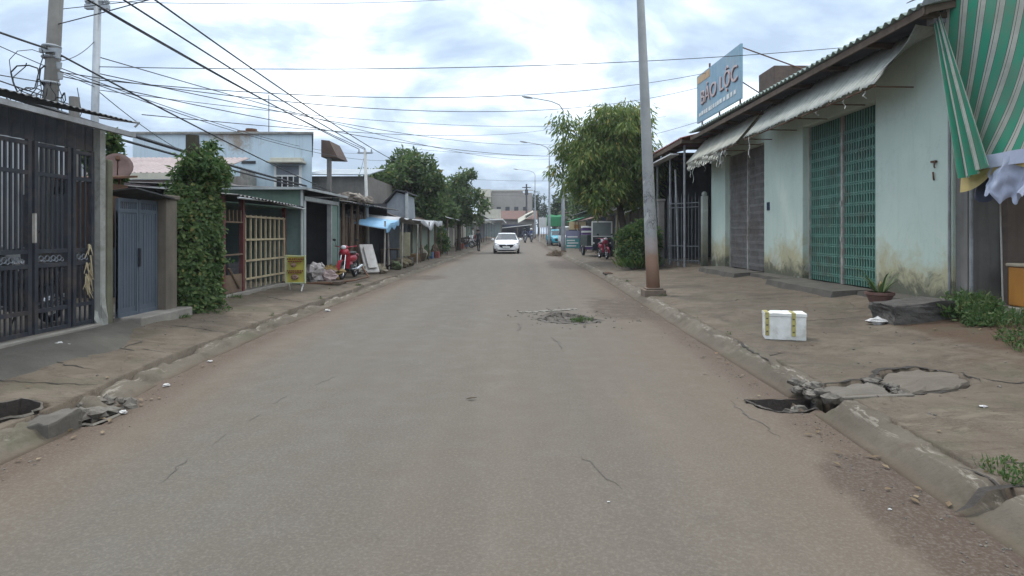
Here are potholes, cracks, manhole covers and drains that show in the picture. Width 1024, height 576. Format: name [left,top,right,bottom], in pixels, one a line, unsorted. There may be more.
crack [0,362,95,385]
pothole [744,399,818,413]
pothole [507,308,641,329]
pothole [0,397,44,423]
